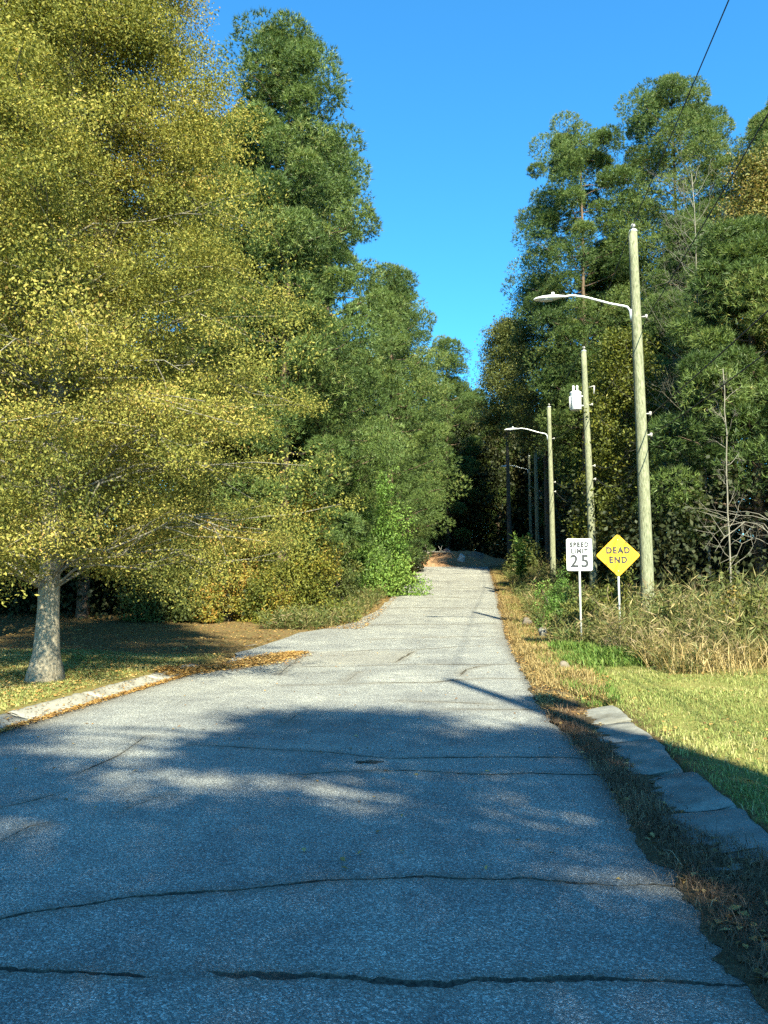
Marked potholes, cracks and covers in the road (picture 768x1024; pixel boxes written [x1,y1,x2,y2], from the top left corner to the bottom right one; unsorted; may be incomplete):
crack [210,745,605,776]
crack [208,970,749,988]
crack [0,966,149,978]
crack [0,875,675,920]
crack [281,581,504,685]
crack [82,736,145,772]
